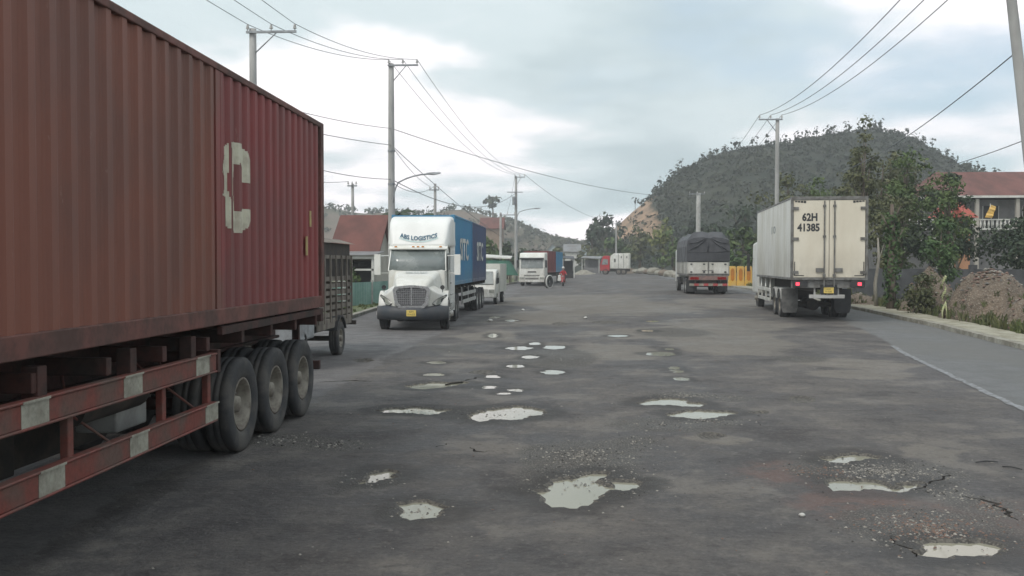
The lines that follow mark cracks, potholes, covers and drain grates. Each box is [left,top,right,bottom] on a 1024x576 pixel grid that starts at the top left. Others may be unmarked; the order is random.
pothole [403,381,470,389]
pothole [818,451,884,463]
pothole [395,499,450,520]
pothole [464,405,548,422]
pothole [823,477,927,493]
pothole [908,537,1008,559]
pothole [374,406,454,415]
pothole [636,397,706,407]
pothole [531,471,644,509]
crack [915,473,1018,520]
pothole [356,469,400,484]
pothole [665,409,739,419]
